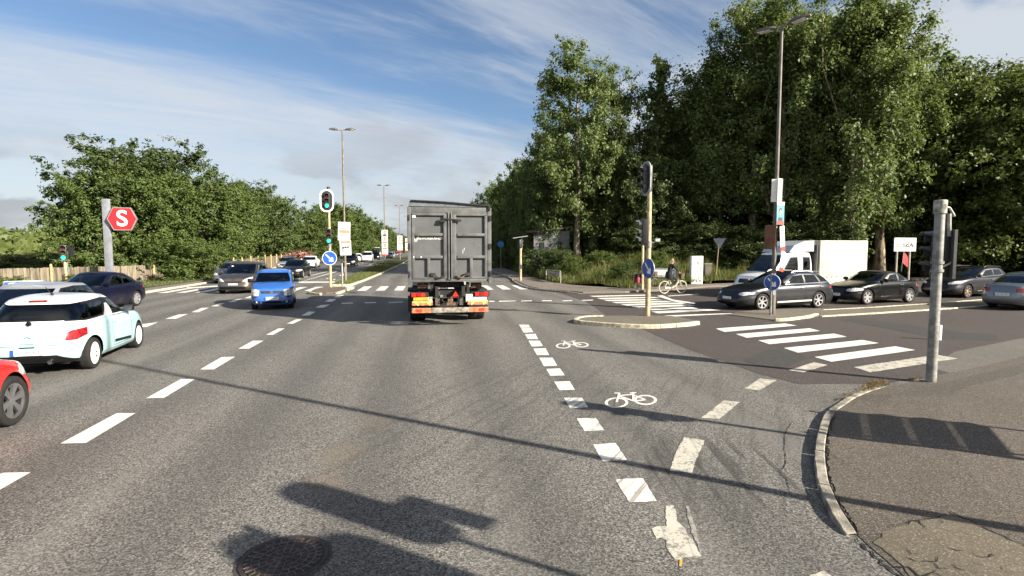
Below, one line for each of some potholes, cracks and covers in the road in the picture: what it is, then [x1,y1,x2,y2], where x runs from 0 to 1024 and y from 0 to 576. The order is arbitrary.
manhole cover [237,536,329,576]
crack [780,423,791,491]
crack [865,511,1023,576]
